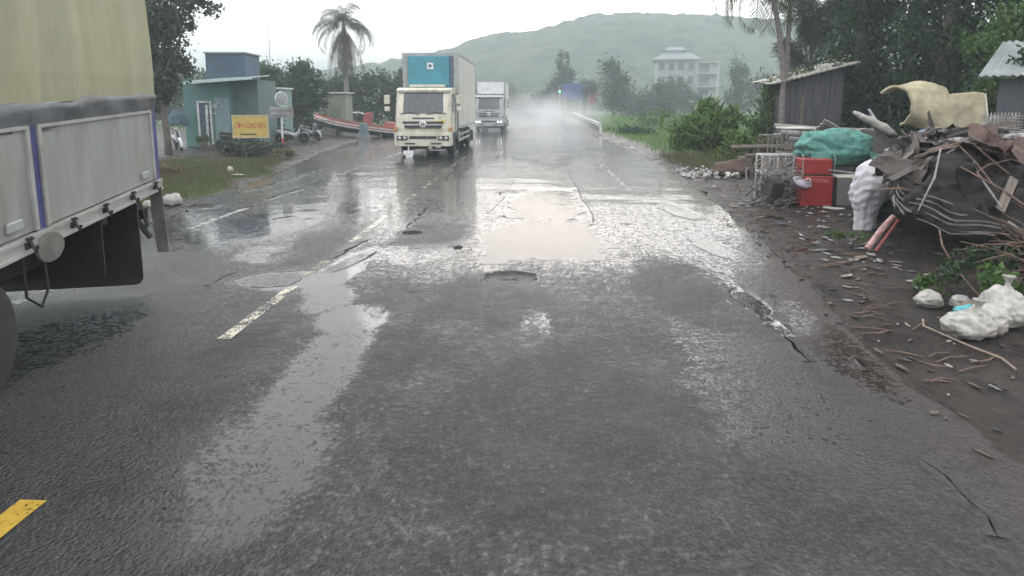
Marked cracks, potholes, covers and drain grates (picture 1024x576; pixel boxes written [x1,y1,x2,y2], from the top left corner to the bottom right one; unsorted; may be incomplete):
crack [328,239,376,259]
pothole [446,244,469,252]
crack [904,453,1011,540]
crack [563,155,611,225]
crack [401,206,434,228]
pothole [476,269,544,285]
